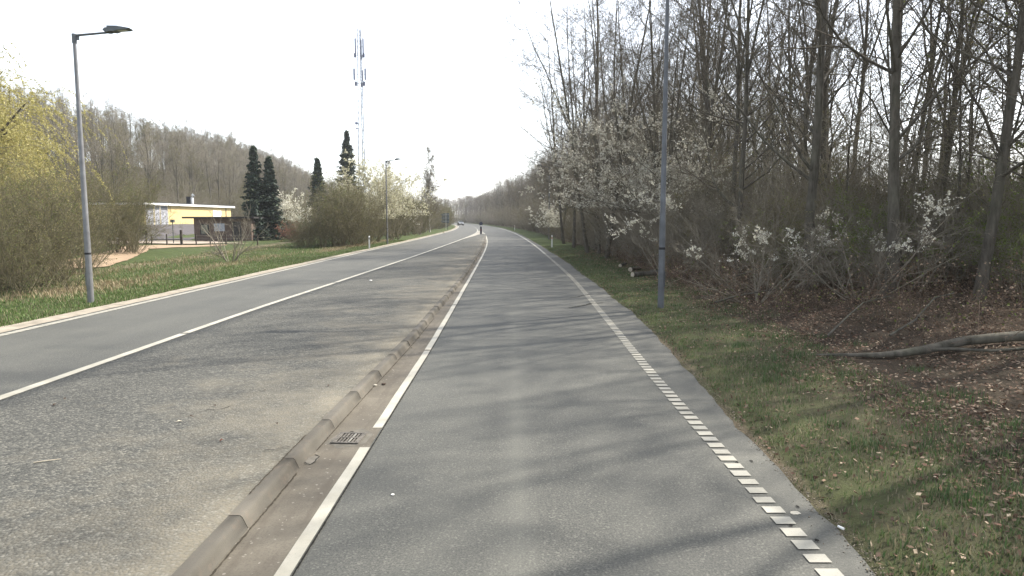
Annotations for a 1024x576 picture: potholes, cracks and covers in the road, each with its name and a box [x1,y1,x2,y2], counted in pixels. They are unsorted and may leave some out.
drain grate [330,432,367,444]
